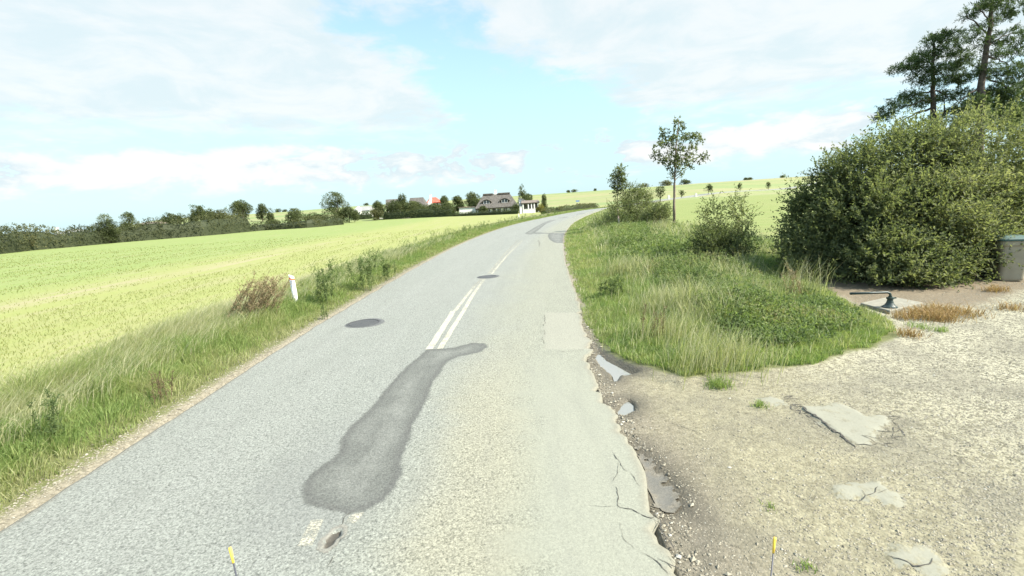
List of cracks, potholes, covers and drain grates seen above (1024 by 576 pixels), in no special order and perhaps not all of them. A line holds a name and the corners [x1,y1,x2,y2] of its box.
pothole [316,524,348,553]
crack [595,454,683,573]
manhole cover [345,318,385,328]
